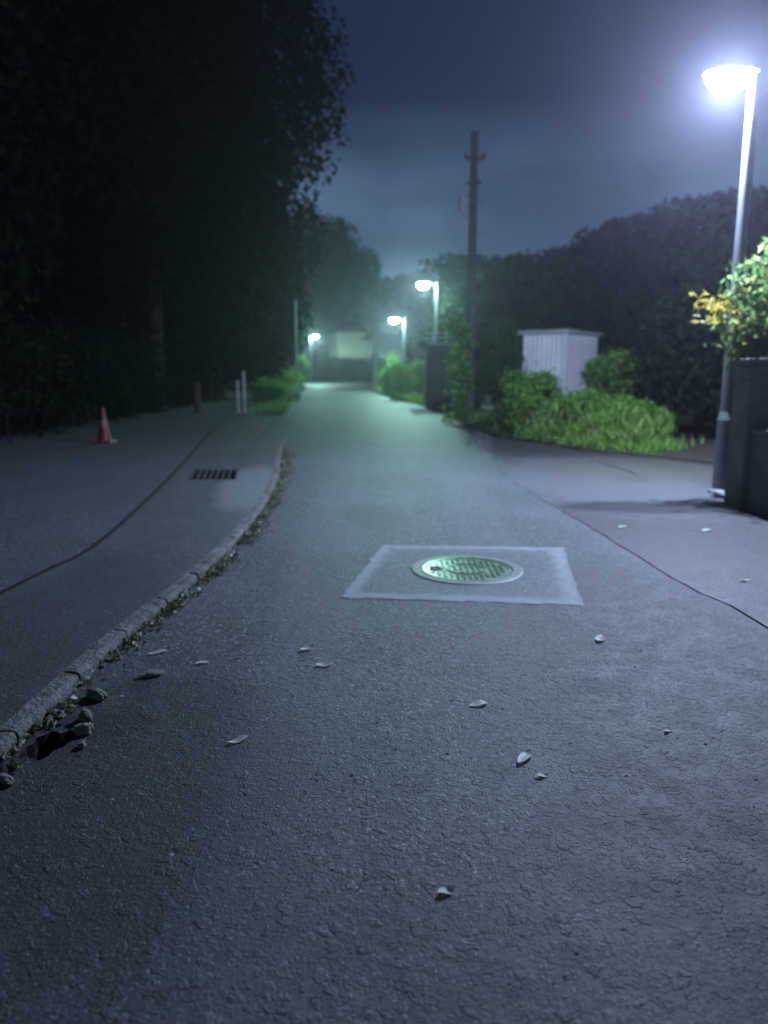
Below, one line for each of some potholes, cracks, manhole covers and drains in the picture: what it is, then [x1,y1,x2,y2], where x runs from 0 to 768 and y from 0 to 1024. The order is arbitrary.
drain grate [188,469,238,480]
manhole cover [411,555,523,585]
